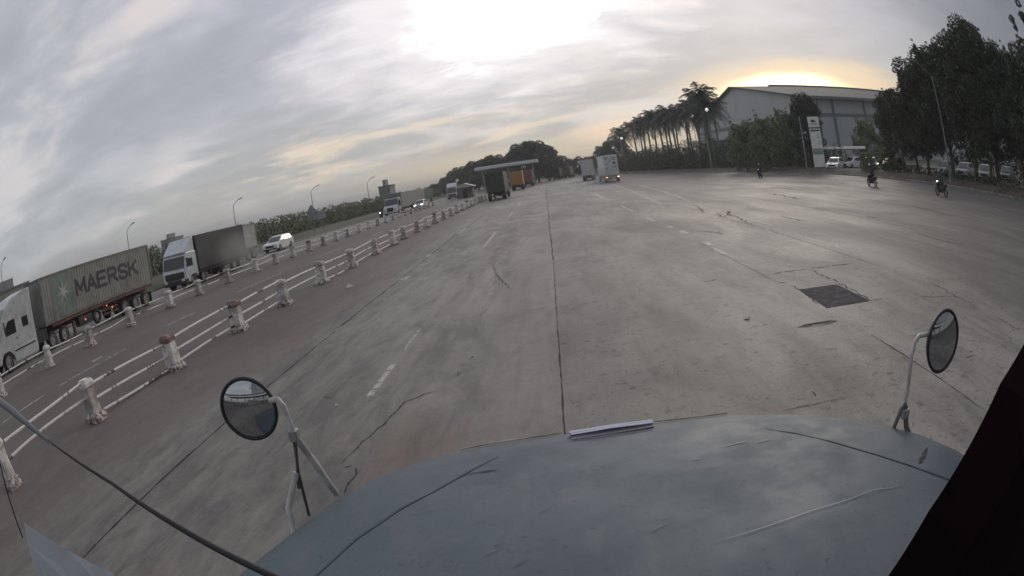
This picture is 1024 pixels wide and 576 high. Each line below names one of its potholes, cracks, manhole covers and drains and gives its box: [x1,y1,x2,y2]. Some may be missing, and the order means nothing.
crack [775,264,883,303]
pothole [796,320,837,328]
crack [341,390,440,492]
